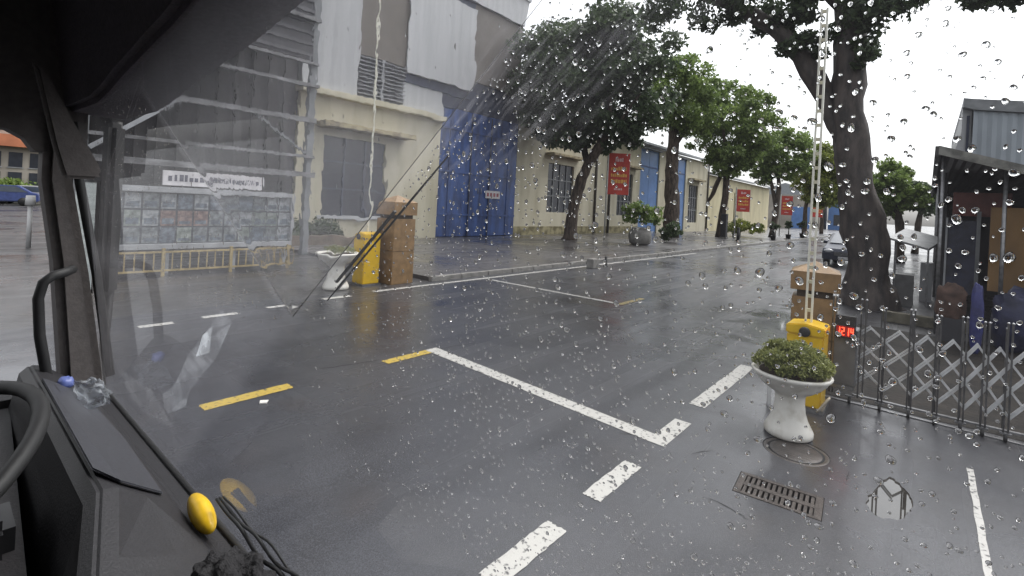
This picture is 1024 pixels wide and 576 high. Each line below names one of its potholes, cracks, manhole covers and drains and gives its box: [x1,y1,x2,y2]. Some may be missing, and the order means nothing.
manhole cover [762,437,831,467]
pothole [865,477,913,520]
drain grate [732,471,825,522]
